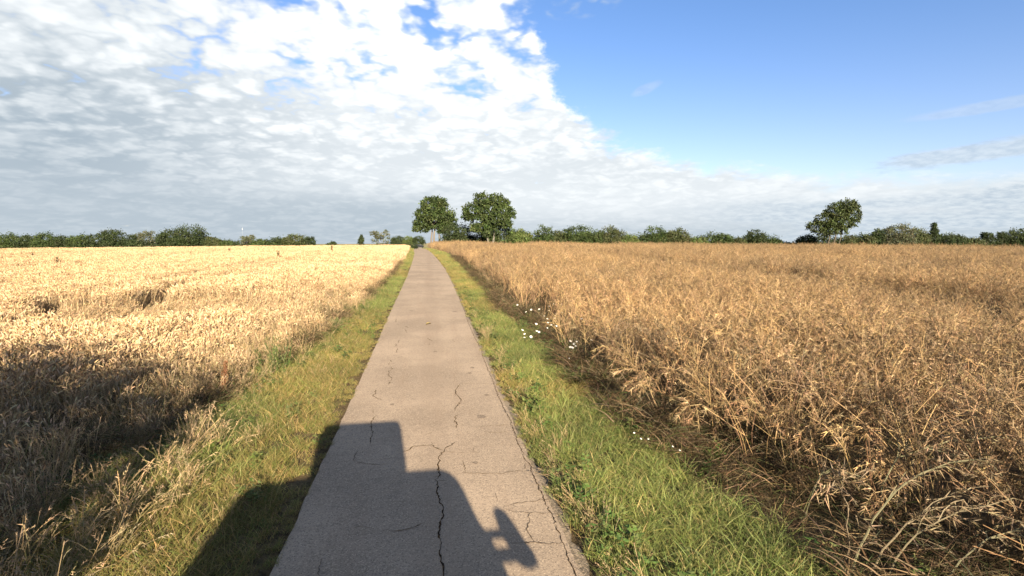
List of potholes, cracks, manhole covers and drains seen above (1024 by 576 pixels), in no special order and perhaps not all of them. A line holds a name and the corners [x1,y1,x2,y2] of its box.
crack [389,298,577,576]
